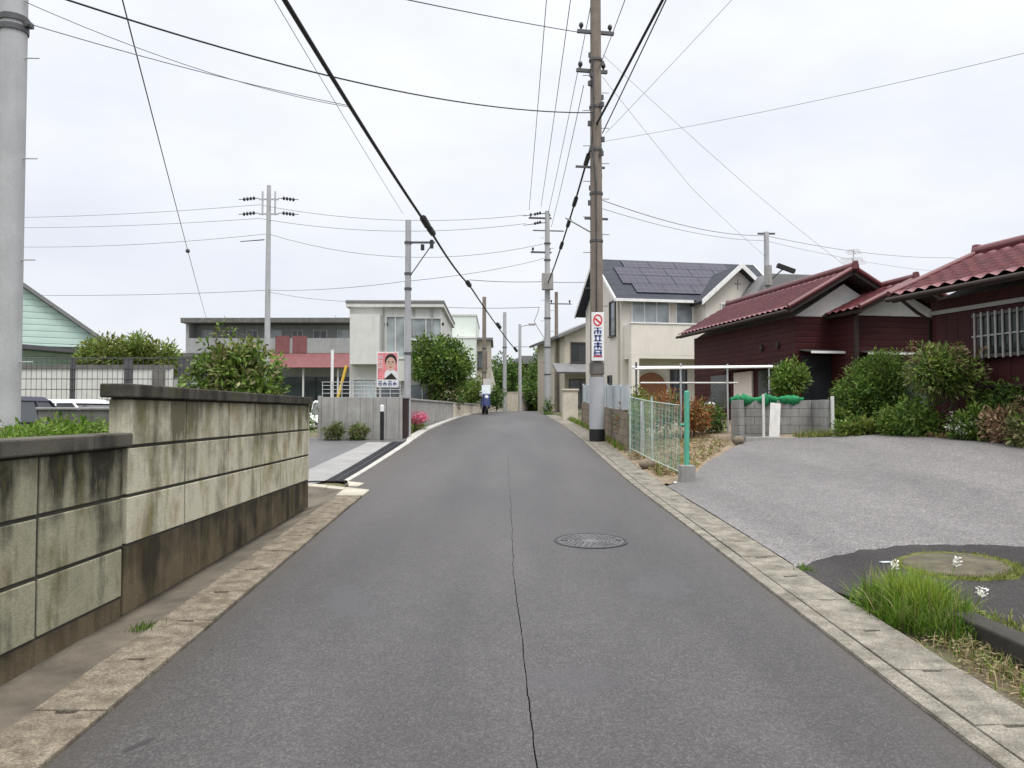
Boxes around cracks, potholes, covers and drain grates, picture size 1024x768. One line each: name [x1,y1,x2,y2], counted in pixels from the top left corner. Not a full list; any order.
drain grate [326,441,404,482]
manhole cover [554,533,628,549]
crack [509,482,538,768]
